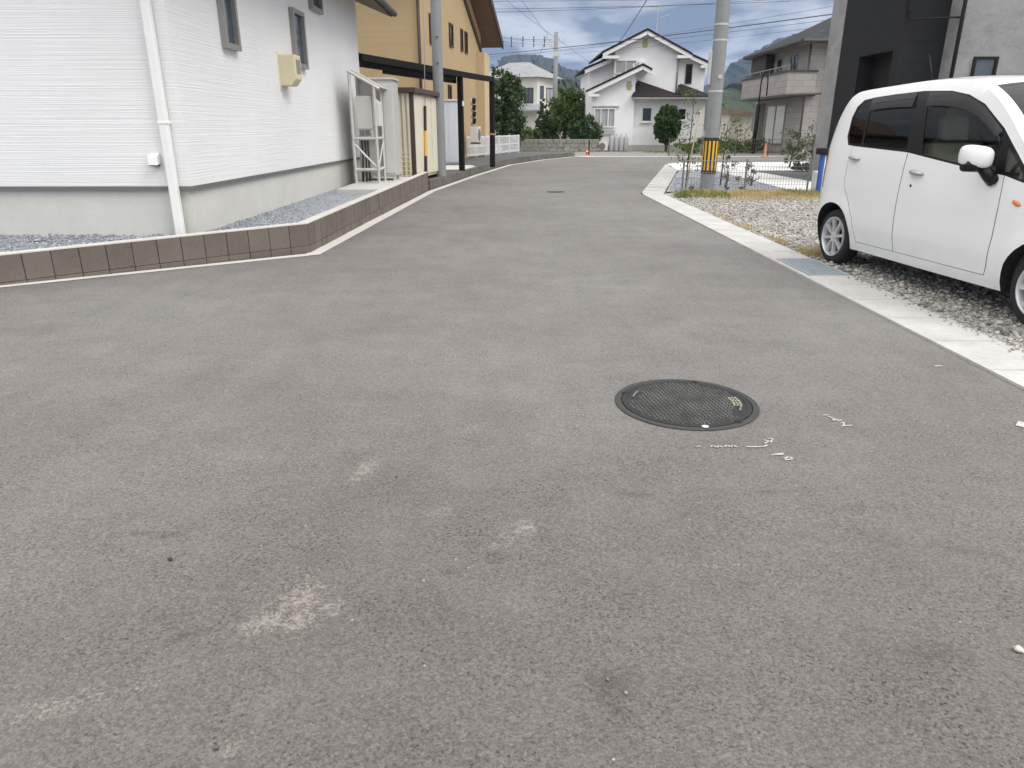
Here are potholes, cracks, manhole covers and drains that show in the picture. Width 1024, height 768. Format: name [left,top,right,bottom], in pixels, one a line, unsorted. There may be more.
drain grate [777,258,851,276]
manhole cover [615,379,760,431]
